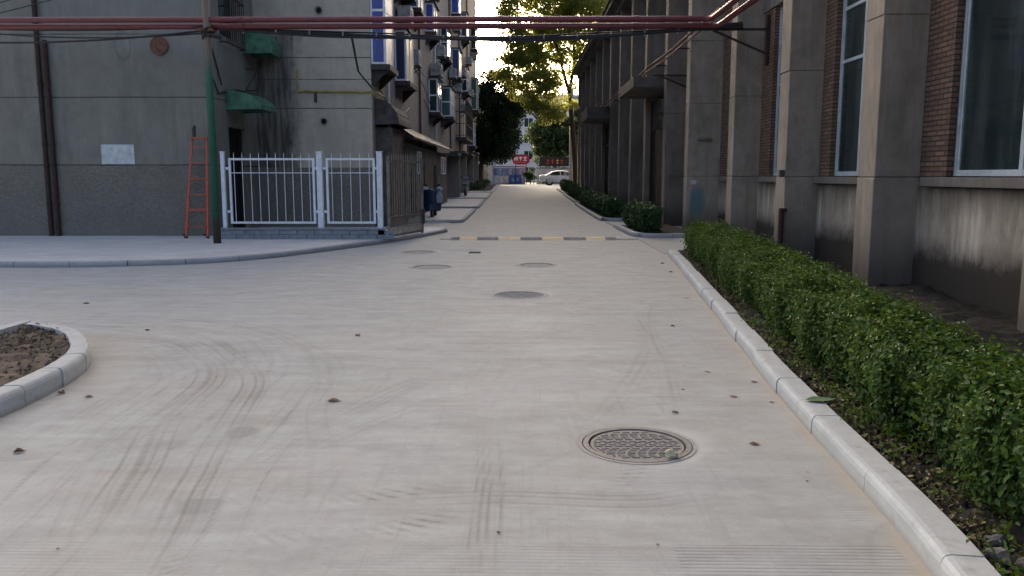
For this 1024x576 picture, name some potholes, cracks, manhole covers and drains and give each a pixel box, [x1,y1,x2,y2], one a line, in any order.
manhole cover [578,426,697,465]
manhole cover [489,290,549,299]
